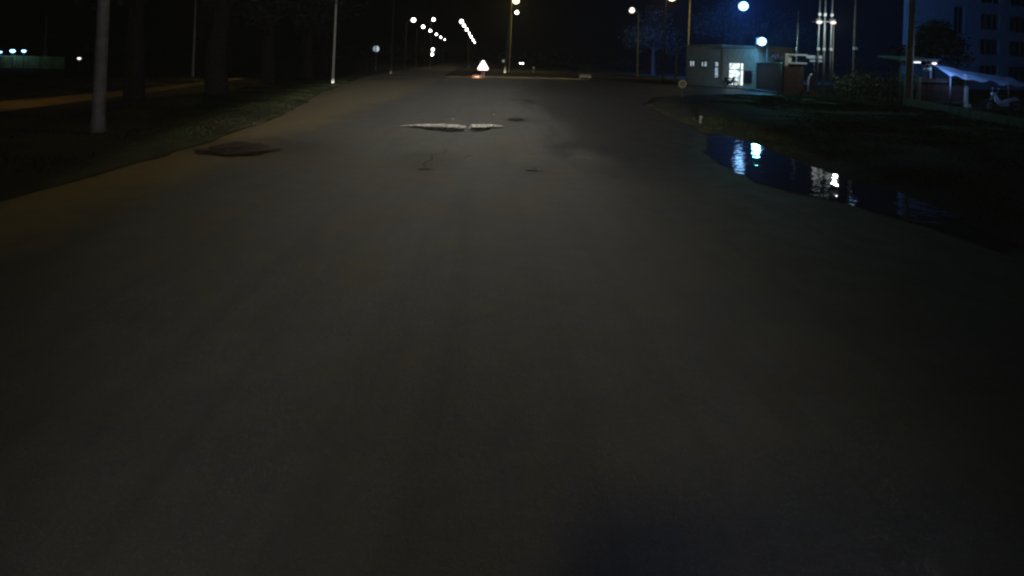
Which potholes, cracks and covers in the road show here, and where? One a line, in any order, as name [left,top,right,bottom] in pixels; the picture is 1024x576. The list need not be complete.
pothole [466,124,504,132]
pothole [401,124,468,132]
